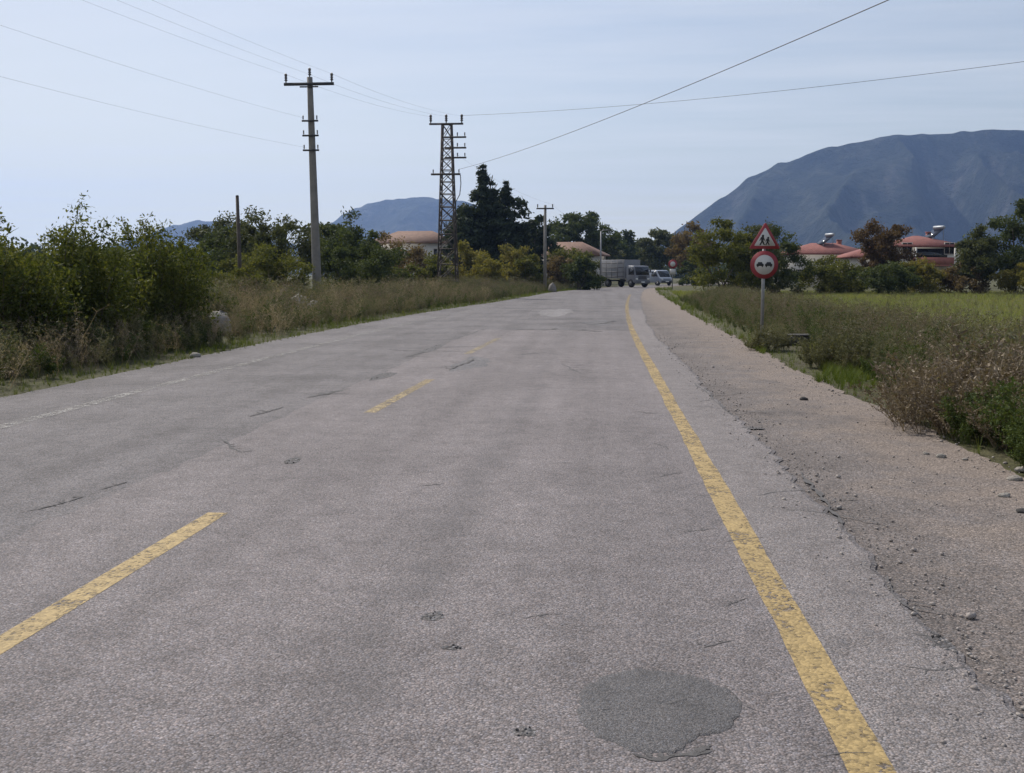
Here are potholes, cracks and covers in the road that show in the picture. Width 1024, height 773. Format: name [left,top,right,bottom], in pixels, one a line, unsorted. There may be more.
crack [306,388,349,398]
pothole [512,726,536,736]
crack [404,331,491,369]
pothole [420,611,444,620]
crack [24,481,127,512]
crack [761,471,880,526]
crack [886,575,945,616]
crack [906,633,968,674]
